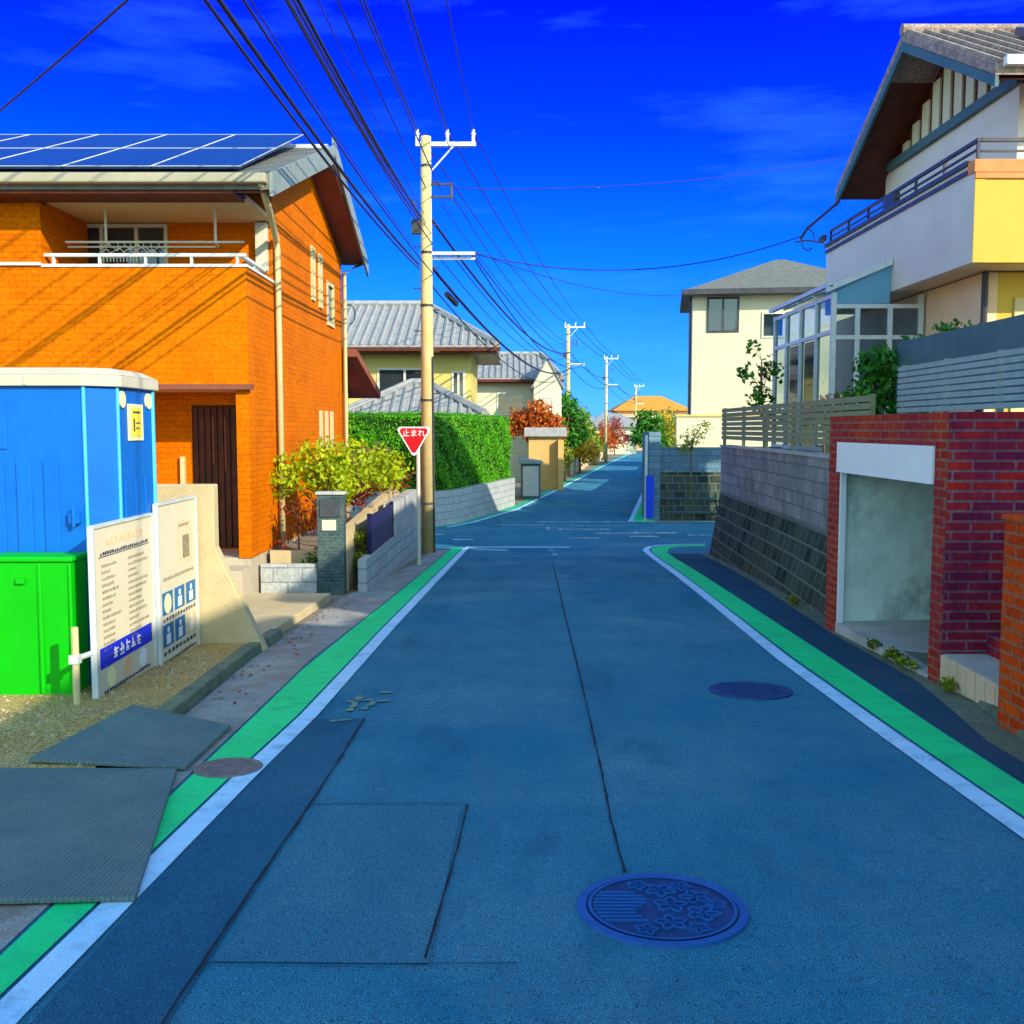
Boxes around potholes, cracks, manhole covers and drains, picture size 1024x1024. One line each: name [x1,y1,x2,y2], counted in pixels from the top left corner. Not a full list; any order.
manhole cover [577,873,750,949]
manhole cover [193,757,263,779]
manhole cover [709,681,793,700]
